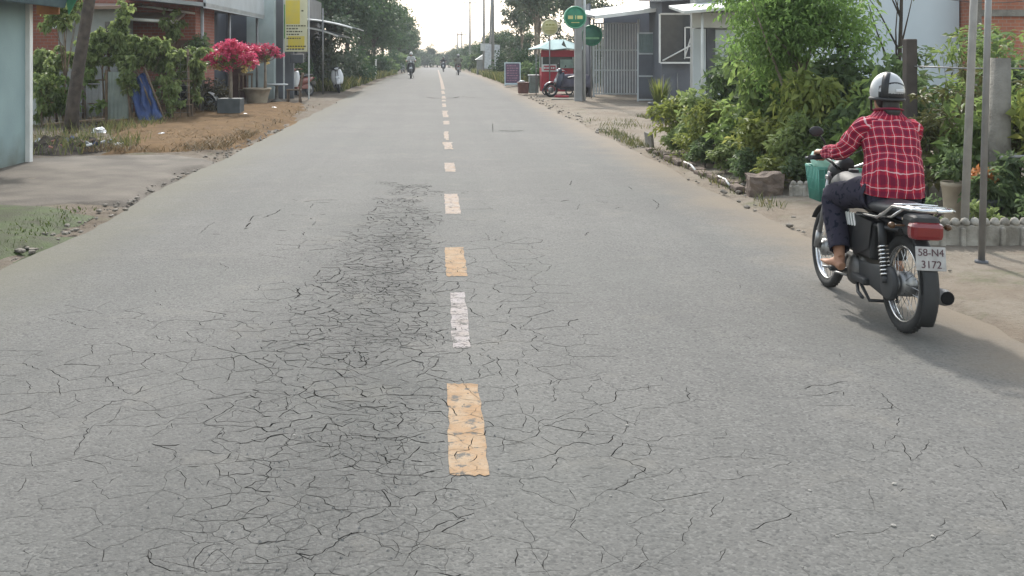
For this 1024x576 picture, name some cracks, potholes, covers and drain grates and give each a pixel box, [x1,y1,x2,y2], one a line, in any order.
crack [419,191,708,576]
crack [585,232,1021,575]
crack [0,182,455,576]
